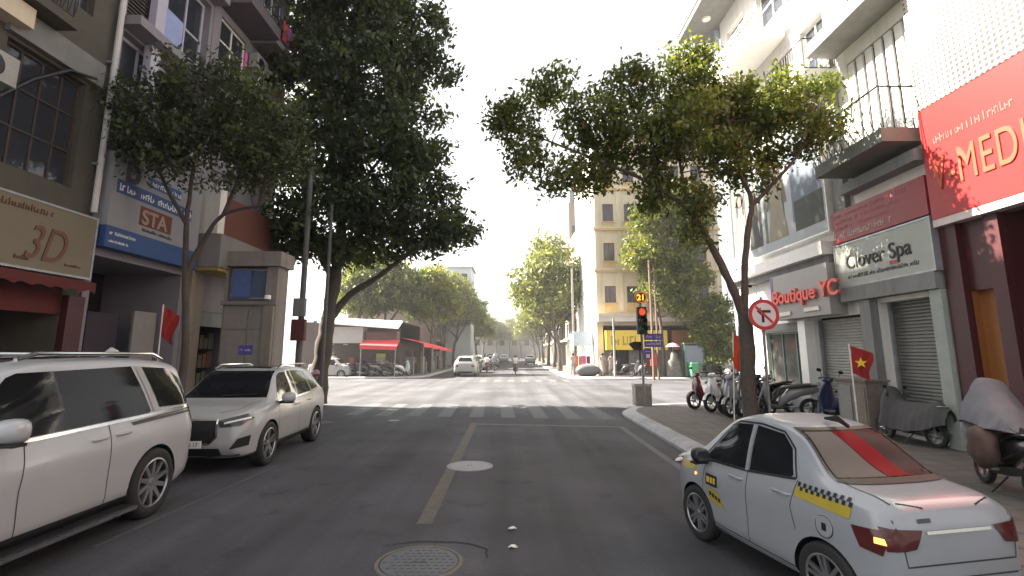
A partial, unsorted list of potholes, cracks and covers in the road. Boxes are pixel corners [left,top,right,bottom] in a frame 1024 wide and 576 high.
manhole cover [373,545,464,576]
crack [384,541,488,558]
manhole cover [447,461,493,471]
